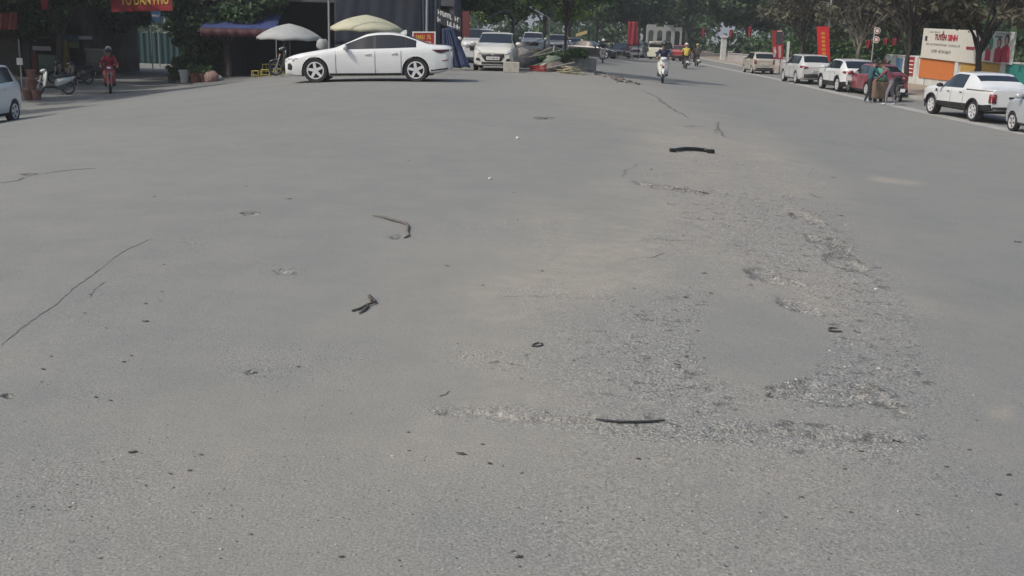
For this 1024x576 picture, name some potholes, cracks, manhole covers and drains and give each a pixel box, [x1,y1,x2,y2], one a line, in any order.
pothole [781,229,897,281]
pothole [727,368,957,443]
pothole [388,393,636,440]
crack [1,168,96,183]
crack [1,239,149,345]
pothole [747,291,854,325]
pothole [717,261,837,295]
pothole [660,405,954,462]
